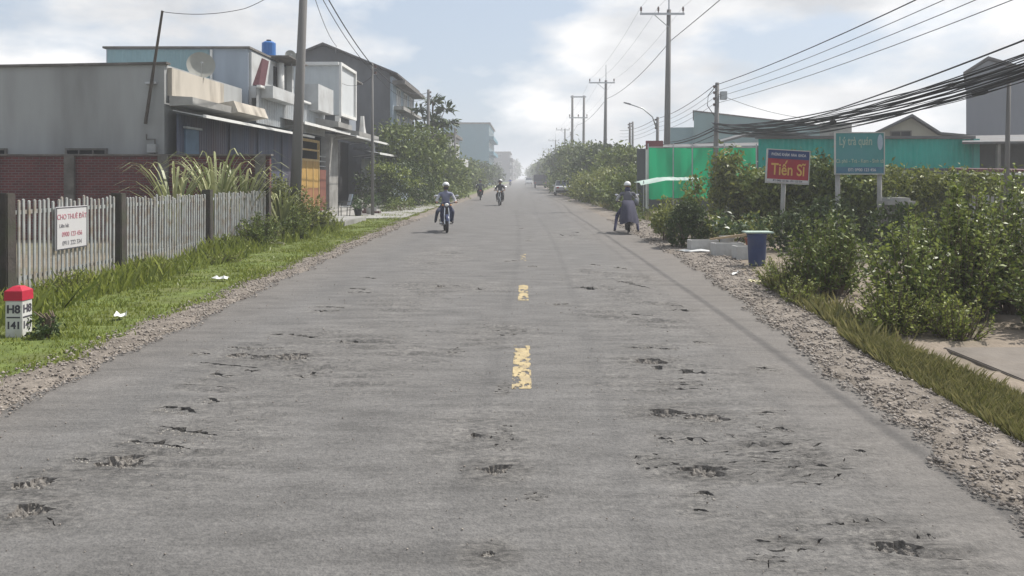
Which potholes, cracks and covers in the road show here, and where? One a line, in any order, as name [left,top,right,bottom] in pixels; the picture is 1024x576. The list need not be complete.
pothole [869,540,924,557]
pothole [6,503,57,519]
pothole [10,477,57,490]
pothole [677,465,729,478]
pothole [478,464,513,476]
pothole [682,414,732,422]
pothole [272,353,310,361]
pothole [648,408,689,418]
pothole [94,454,148,469]
